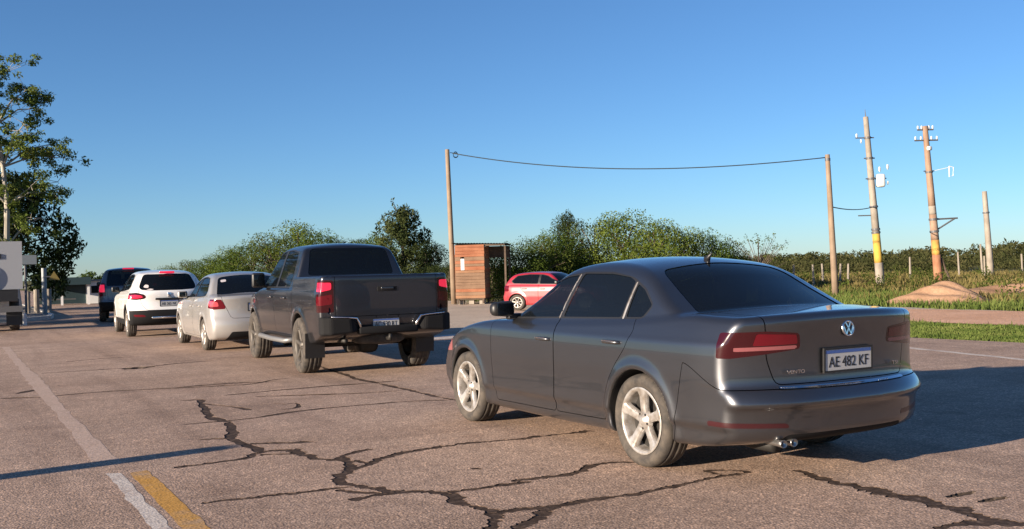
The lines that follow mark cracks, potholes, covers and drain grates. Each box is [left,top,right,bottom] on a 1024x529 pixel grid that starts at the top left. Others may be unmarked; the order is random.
crack [53,357,203,373]
crack [0,378,753,529]
